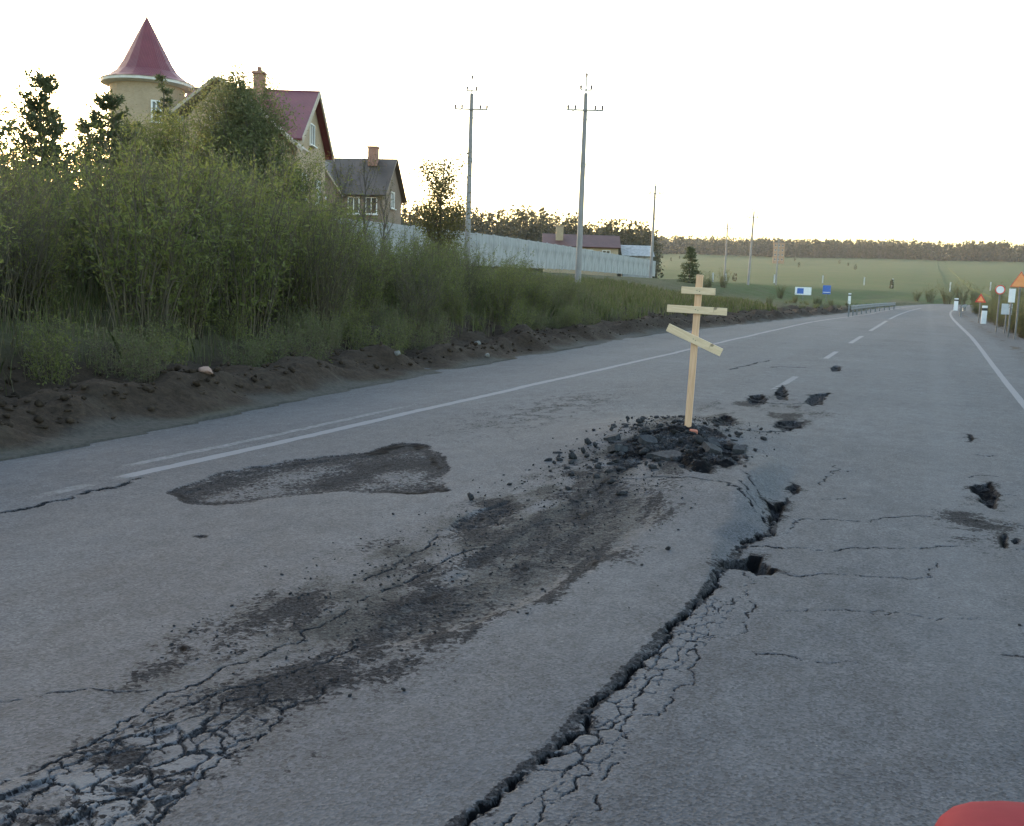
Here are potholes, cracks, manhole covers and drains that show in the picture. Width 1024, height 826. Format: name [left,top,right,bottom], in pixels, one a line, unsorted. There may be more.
pothole [602,423,746,475]
crack [0,464,1024,826]
pothole [714,554,781,577]
pothole [745,394,770,405]
pothole [997,533,1011,549]
pothole [710,414,740,427]
pothole [770,420,807,431]
pothole [803,393,832,407]
pothole [966,482,1004,511]
pothole [772,385,790,401]
